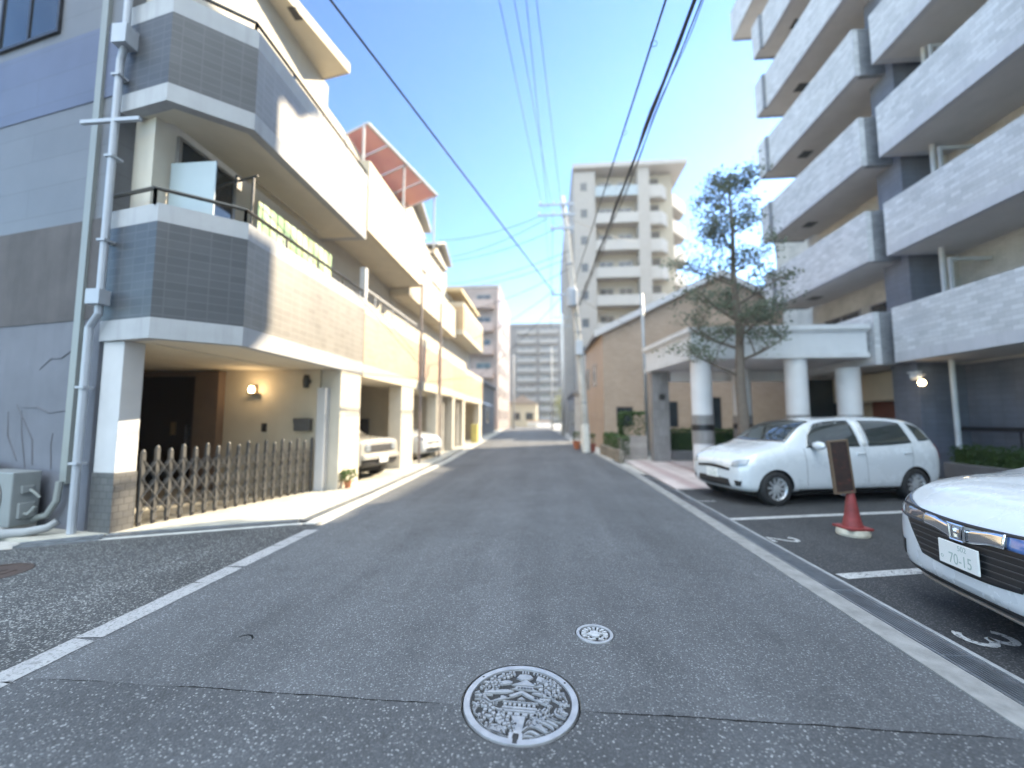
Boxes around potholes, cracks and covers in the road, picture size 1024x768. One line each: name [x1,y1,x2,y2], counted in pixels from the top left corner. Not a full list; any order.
manhole cover [576,624,614,644]
manhole cover [461,666,581,749]
manhole cover [0,563,35,579]
